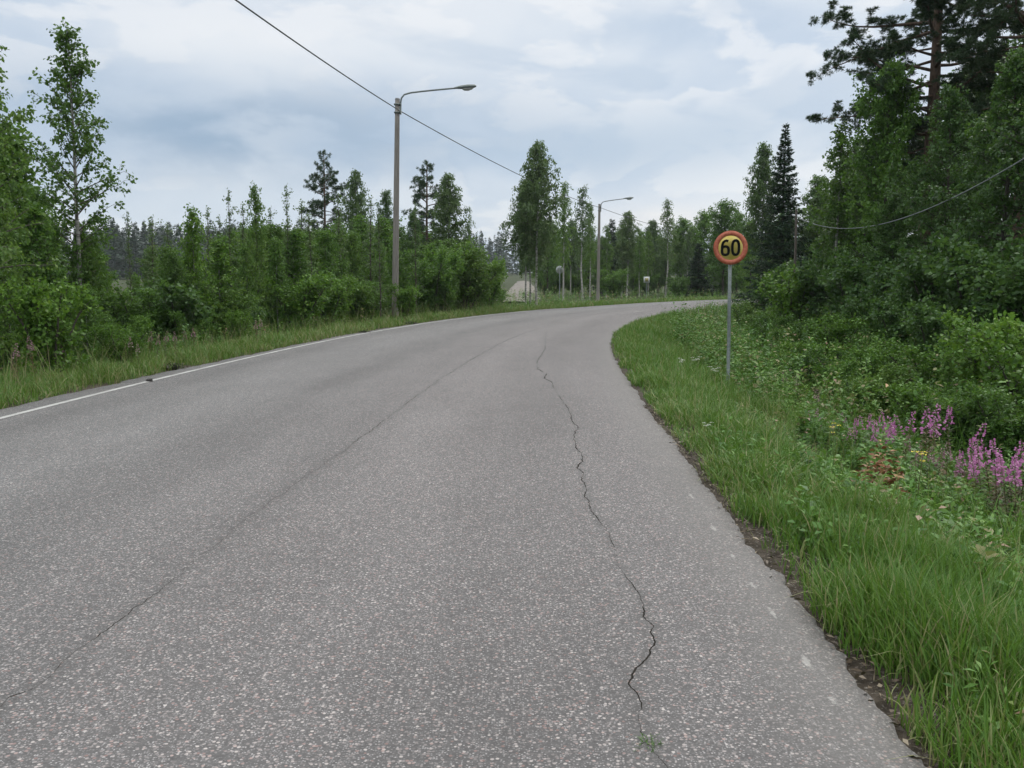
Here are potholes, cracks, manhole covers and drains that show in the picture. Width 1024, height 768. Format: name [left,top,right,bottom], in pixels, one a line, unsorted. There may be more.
crack [1,329,536,706]
crack [537,351,668,768]
